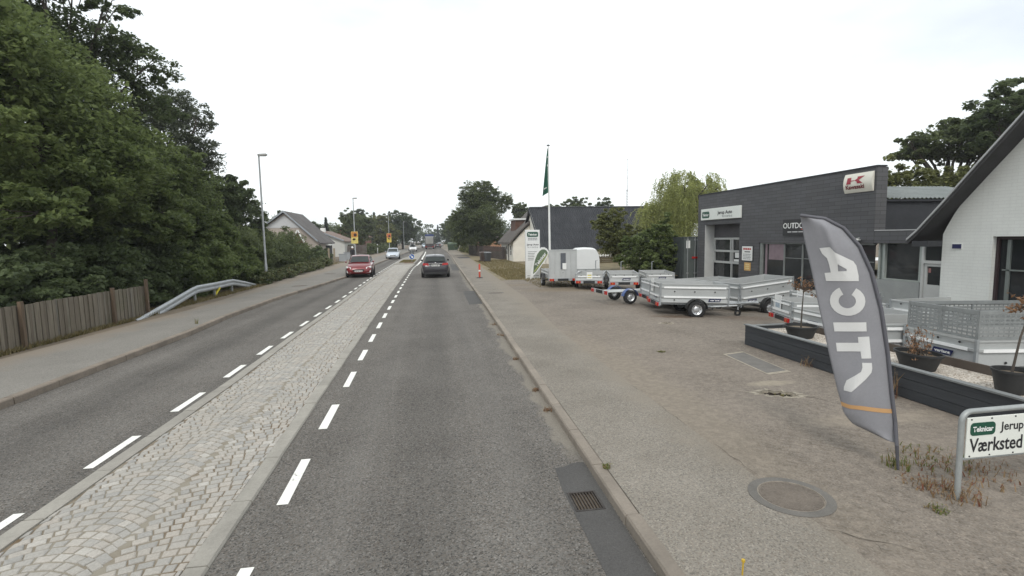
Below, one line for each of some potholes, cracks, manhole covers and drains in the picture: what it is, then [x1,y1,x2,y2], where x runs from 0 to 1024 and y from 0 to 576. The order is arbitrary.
manhole cover [748,477,837,518]
drain grate [567,490,606,512]
pothole [749,388,807,398]
